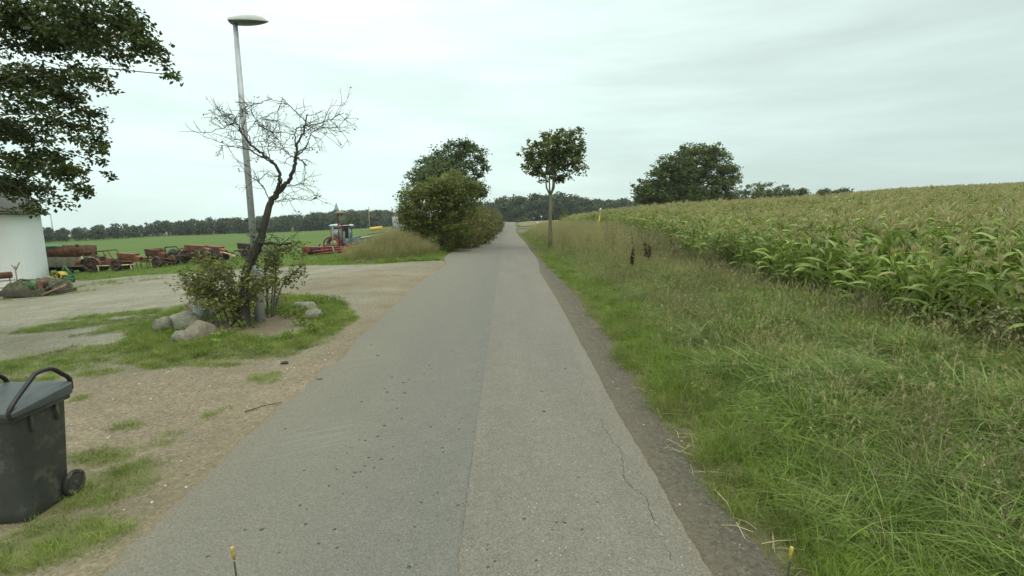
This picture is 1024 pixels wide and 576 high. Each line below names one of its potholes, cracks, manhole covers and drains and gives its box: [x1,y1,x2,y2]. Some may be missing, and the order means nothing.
crack [601,420,673,561]
